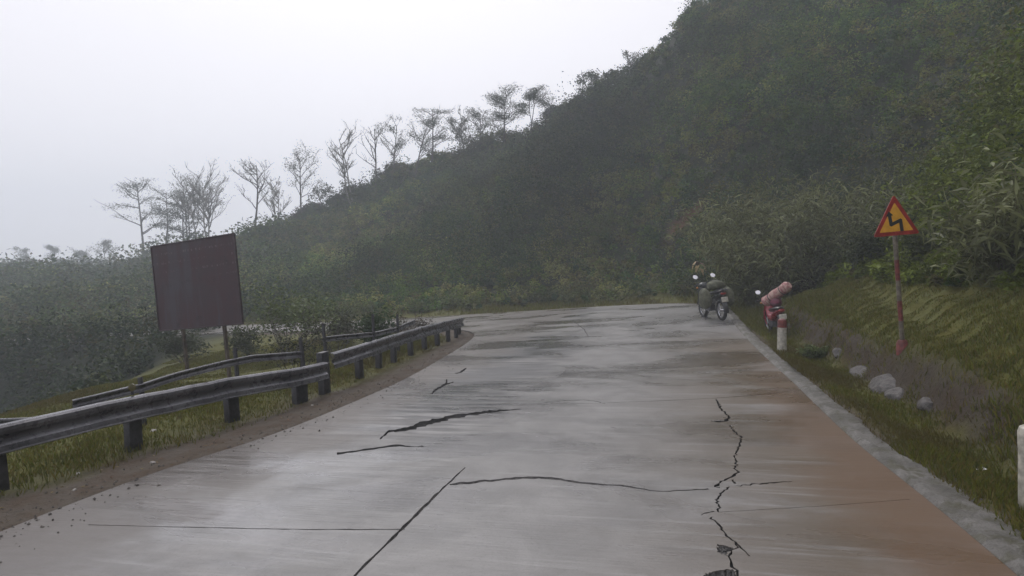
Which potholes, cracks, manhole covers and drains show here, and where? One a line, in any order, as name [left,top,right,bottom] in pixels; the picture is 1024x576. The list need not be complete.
crack [450,400,780,576]
crack [337,369,520,455]
